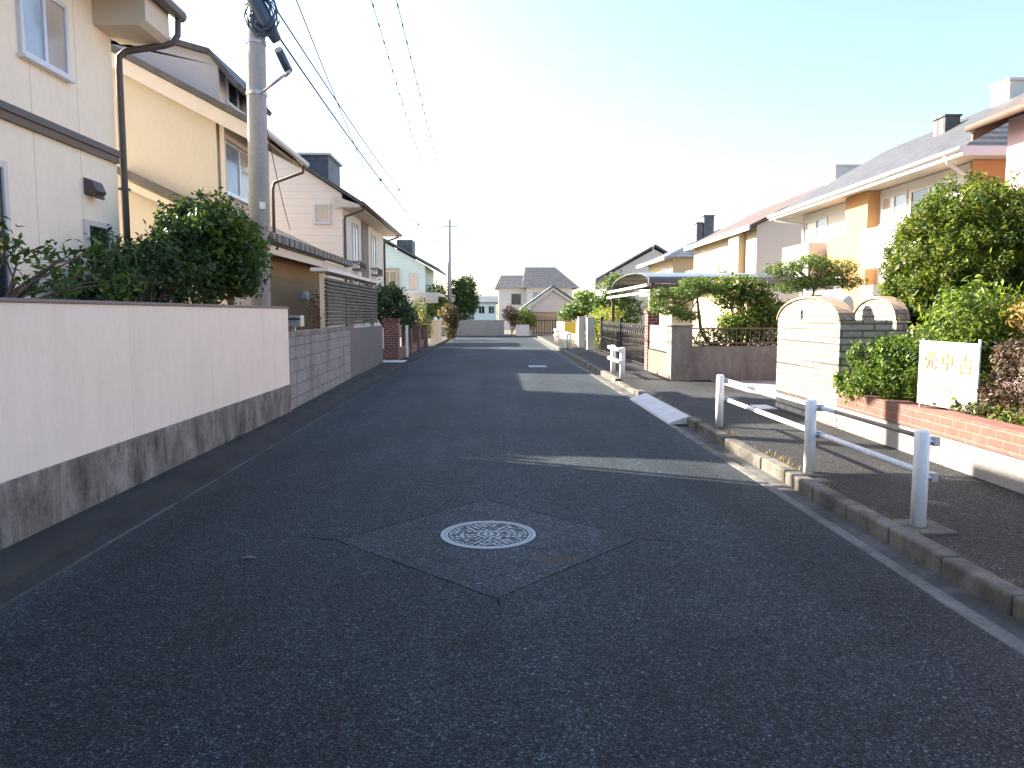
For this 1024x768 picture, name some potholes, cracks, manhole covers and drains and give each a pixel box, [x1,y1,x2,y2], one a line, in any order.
manhole cover [440,521,536,550]
